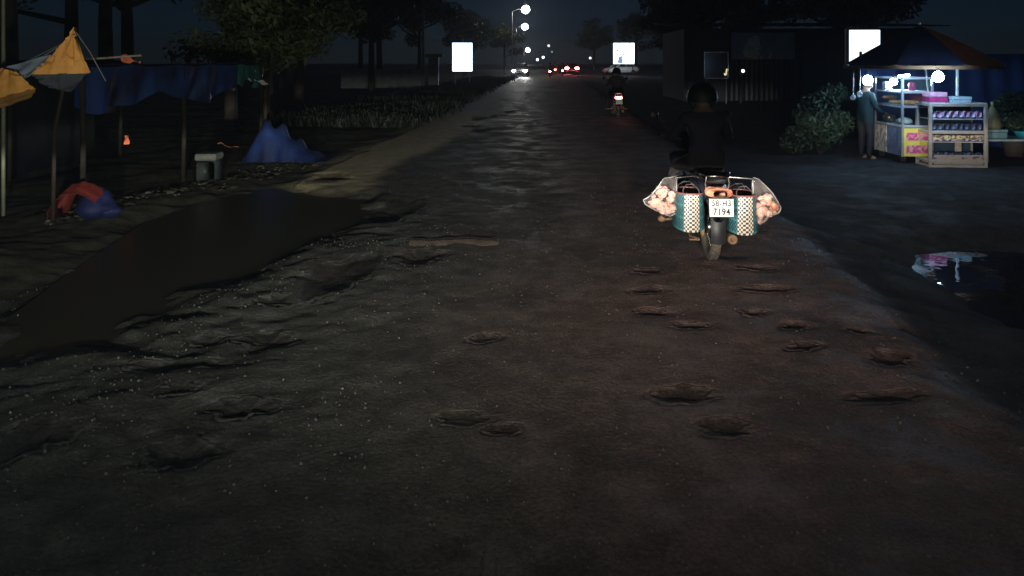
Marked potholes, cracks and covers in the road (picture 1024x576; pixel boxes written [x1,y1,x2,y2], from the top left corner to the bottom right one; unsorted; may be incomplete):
pothole [643,383,723,405]
pothole [431,411,498,429]
pothole [783,340,824,352]
pothole [733,285,806,294]
pothole [737,308,772,317]
pothole [480,422,524,436]
pothole [466,333,504,344]
pothole [865,348,917,367]
pothole [836,388,940,405]
pothole [138,433,232,472]
pothole [667,322,716,330]
pothole [691,415,758,440]
